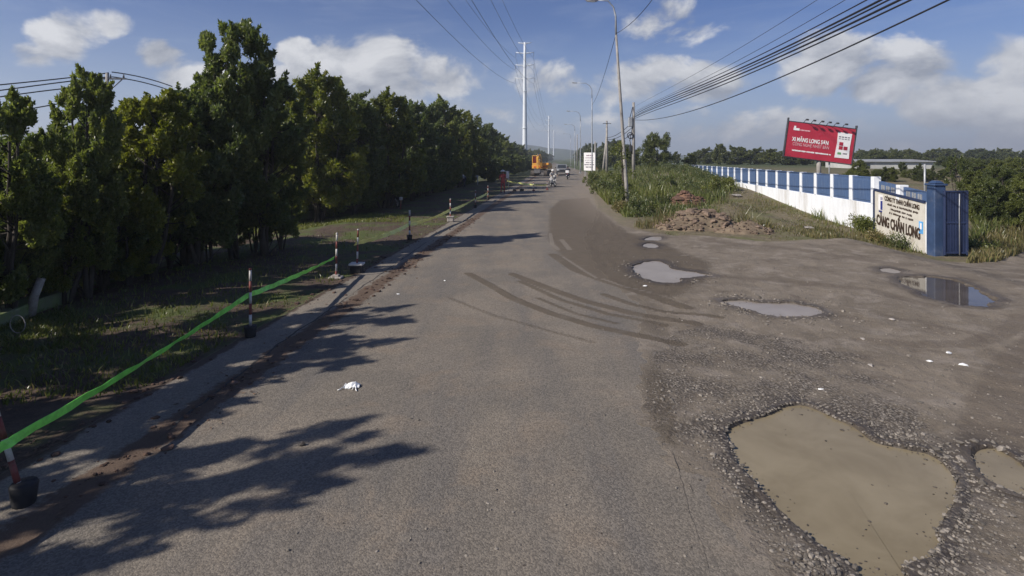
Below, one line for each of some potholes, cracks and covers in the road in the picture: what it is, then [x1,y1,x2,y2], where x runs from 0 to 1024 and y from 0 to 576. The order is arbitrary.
pothole [714,297,833,319]
pothole [718,399,971,576]
pothole [886,273,1012,309]
pothole [627,234,679,243]
pothole [620,259,724,285]
pothole [961,441,1024,498]
pothole [627,241,675,250]
